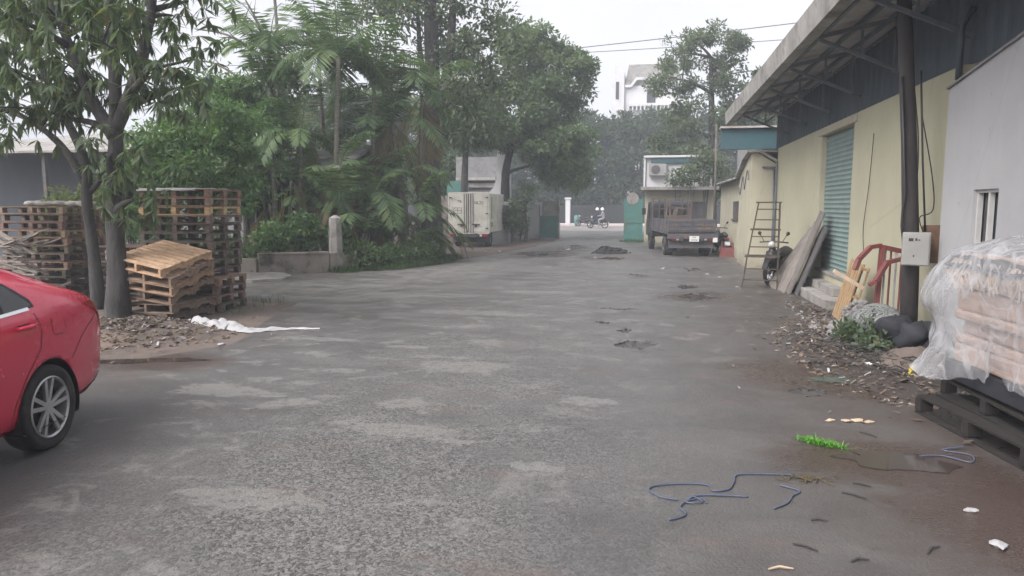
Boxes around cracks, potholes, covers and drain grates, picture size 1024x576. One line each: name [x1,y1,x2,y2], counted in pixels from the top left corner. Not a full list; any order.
pothole [673,293,717,301]
pothole [615,340,658,350]
